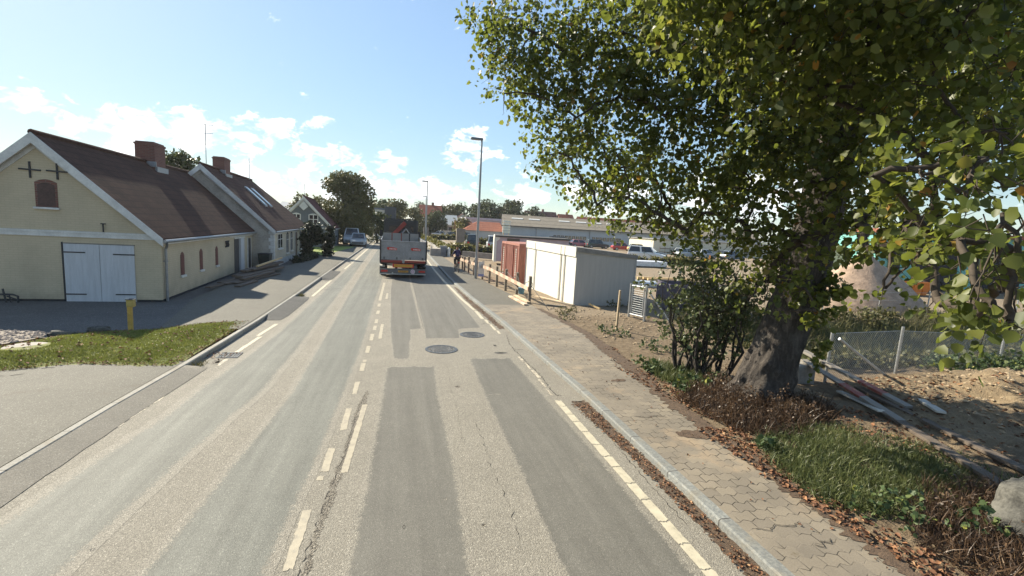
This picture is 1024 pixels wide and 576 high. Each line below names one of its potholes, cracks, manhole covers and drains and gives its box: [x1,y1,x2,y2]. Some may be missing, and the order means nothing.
crack [297,395,365,576]
manhole cover [425,345,458,354]
